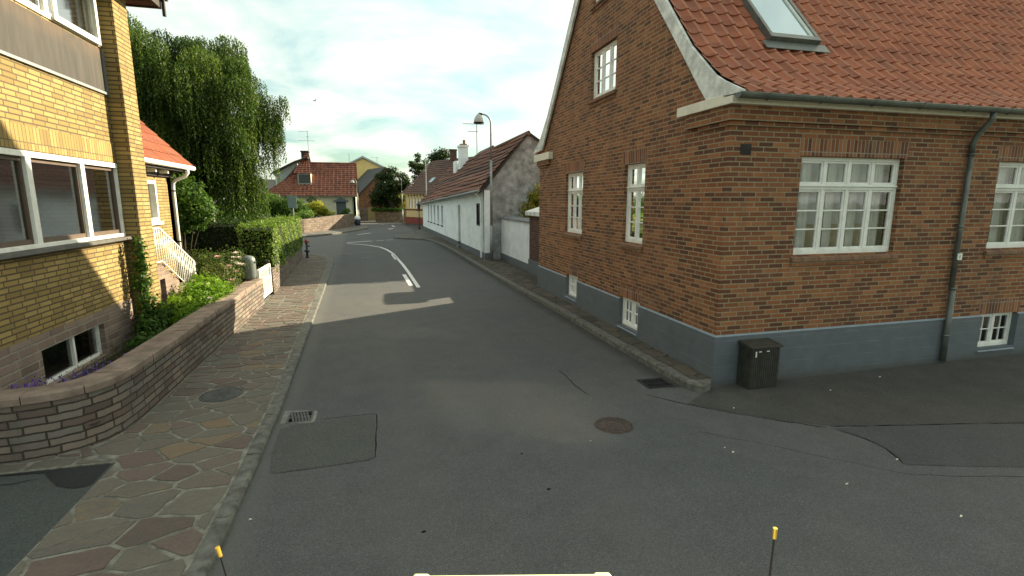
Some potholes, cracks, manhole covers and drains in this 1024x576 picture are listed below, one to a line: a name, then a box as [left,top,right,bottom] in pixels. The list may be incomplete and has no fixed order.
manhole cover [594,417,634,434]
manhole cover [199,387,243,402]
drain grate [637,378,677,389]
drain grate [280,410,318,424]
